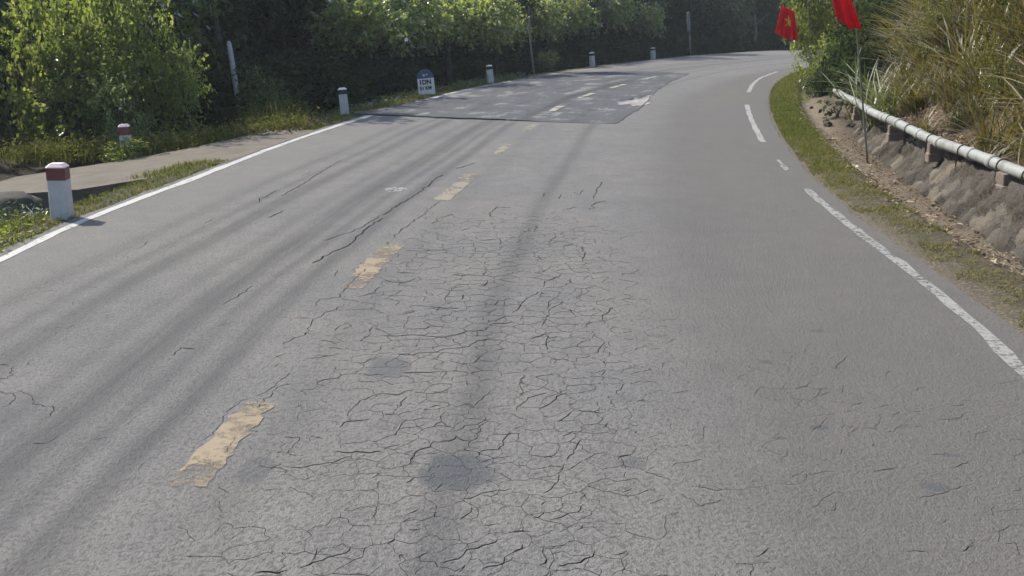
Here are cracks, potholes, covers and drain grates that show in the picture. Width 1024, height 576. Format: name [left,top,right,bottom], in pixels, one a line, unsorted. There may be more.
crack [705,334,1024,556]
crack [0,354,55,422]
crack [543,182,604,227]
crack [124,202,775,576]
crack [174,163,474,355]
